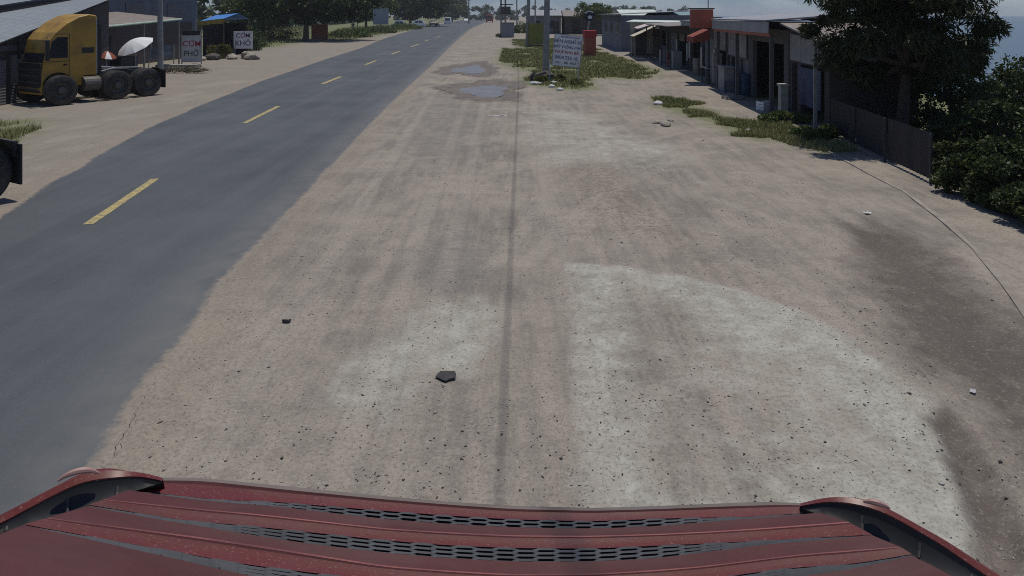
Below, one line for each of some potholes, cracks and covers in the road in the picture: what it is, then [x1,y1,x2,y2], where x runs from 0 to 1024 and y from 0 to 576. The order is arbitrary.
pothole [435,61,498,77]
pothole [436,80,524,101]
